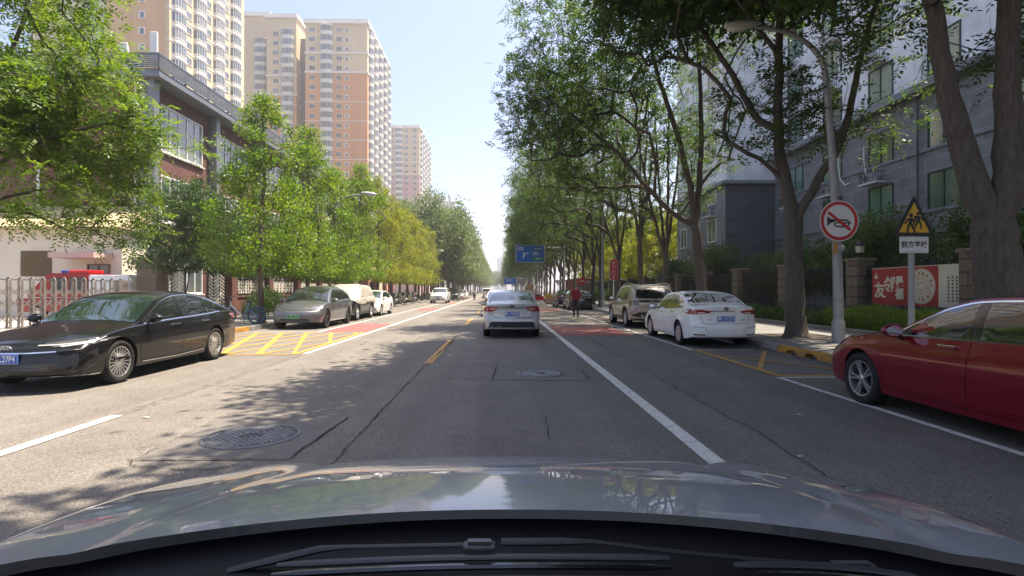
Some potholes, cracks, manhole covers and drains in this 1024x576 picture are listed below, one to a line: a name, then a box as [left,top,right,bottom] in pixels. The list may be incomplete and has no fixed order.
manhole cover [516,369,566,377]
crack [119,415,347,470]
manhole cover [198,424,302,450]
